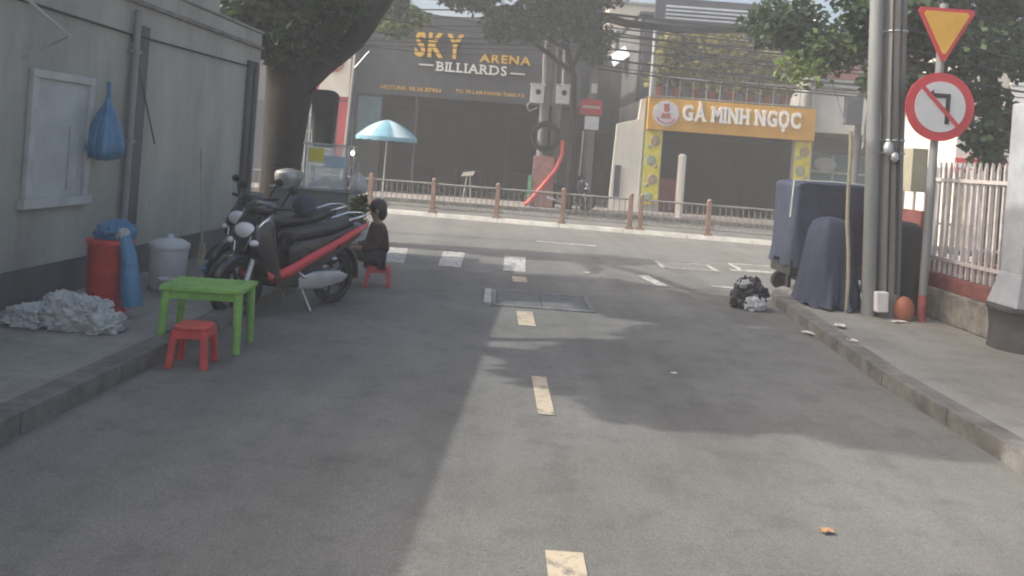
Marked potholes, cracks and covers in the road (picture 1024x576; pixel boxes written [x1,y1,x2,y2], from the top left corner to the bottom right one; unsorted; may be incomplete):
manhole cover [483,288,596,313]
